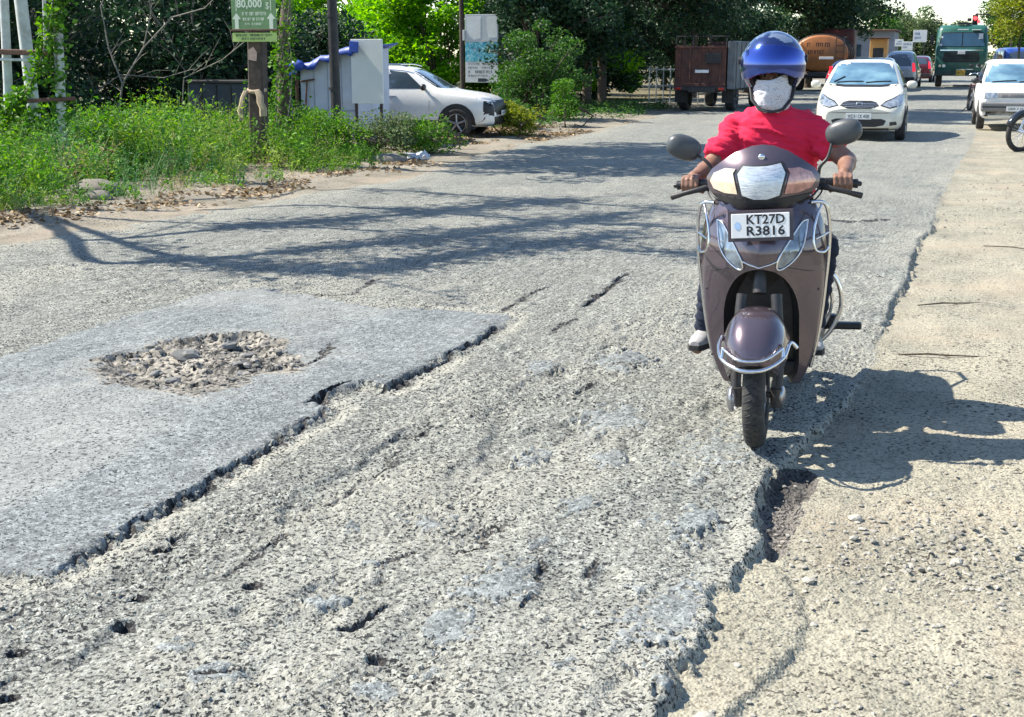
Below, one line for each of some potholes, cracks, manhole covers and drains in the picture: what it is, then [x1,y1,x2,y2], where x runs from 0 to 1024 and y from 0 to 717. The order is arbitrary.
crack [377,552,417,570]
pothole [755,467,819,563]
crack [502,287,549,313]
crack [549,273,630,335]
pothole [79,330,309,396]
crack [205,533,290,583]
pothole [112,621,137,635]
crack [302,425,435,511]
